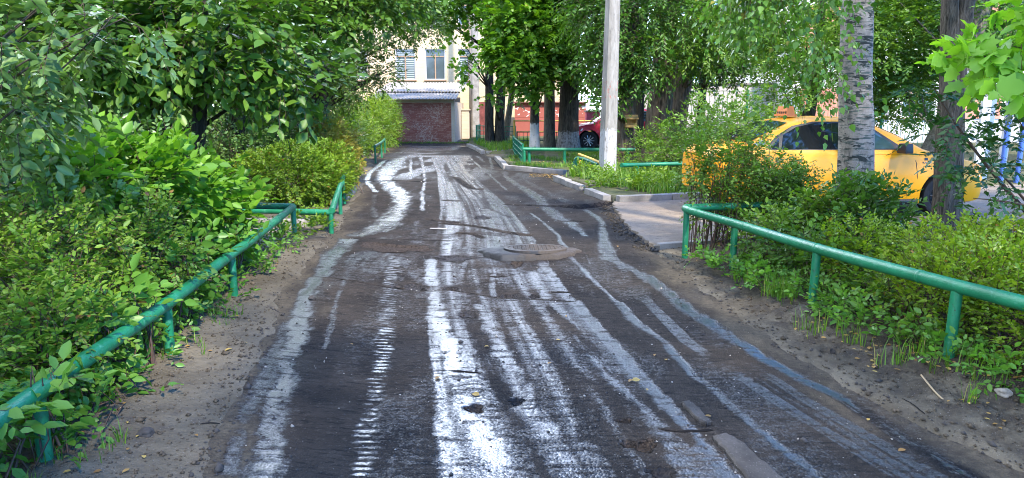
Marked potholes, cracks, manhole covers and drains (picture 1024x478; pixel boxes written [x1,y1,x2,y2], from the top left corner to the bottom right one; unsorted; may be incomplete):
pothole [621,439,657,453]
crack [431,219,518,238]
pothole [463,404,483,413]
manhole cover [478,244,582,261]
